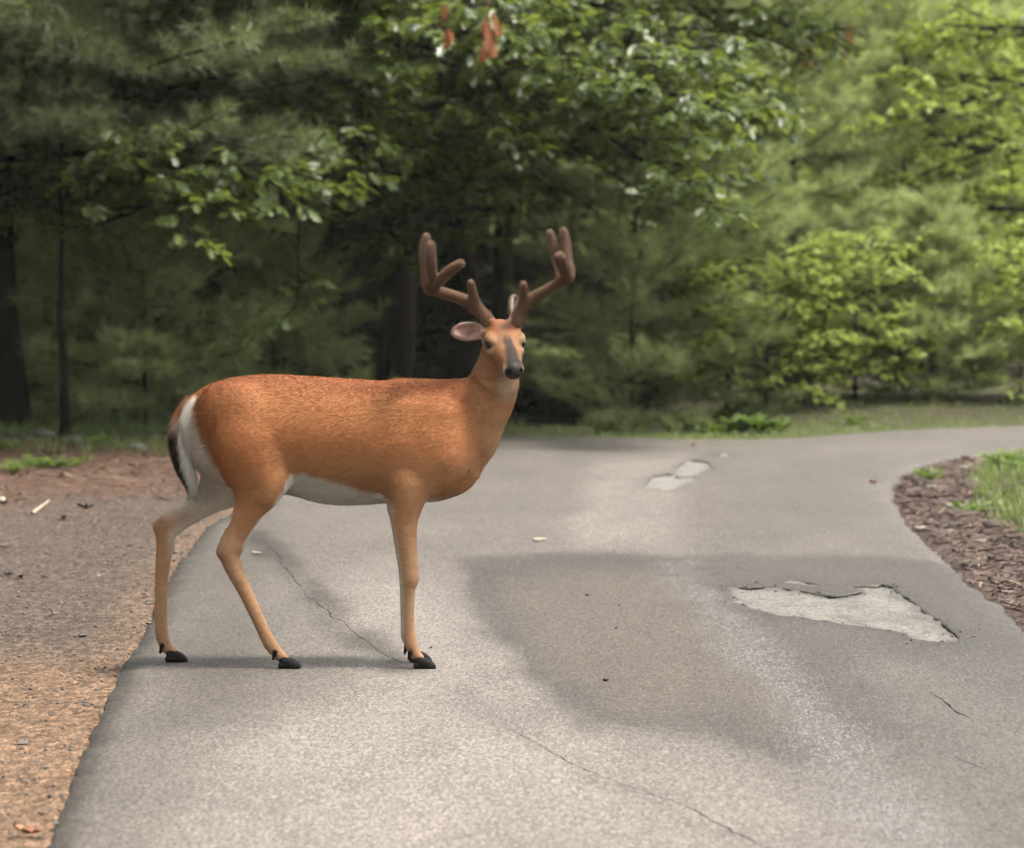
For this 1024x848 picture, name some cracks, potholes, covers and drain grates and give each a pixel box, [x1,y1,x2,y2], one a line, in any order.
crack [515,732,766,848]
pothole [644,460,712,490]
pothole [721,584,960,642]
crack [265,541,403,664]
